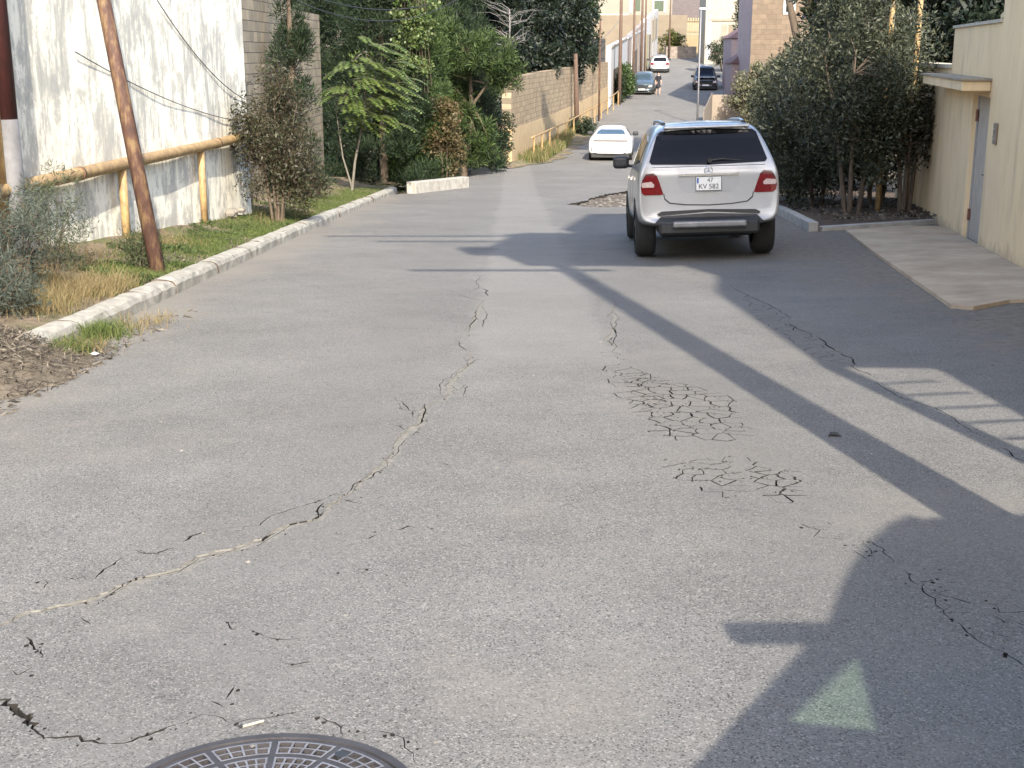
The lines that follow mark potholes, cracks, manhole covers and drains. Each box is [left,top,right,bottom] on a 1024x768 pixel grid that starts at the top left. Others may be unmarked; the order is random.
pothole [568,191,627,208]
crack [799,520,1024,665]
crack [735,289,1024,461]
crack [600,300,752,441]
manhole cover [145,733,407,768]
crack [662,456,809,503]
crack [0,686,423,765]
crack [0,280,488,677]
